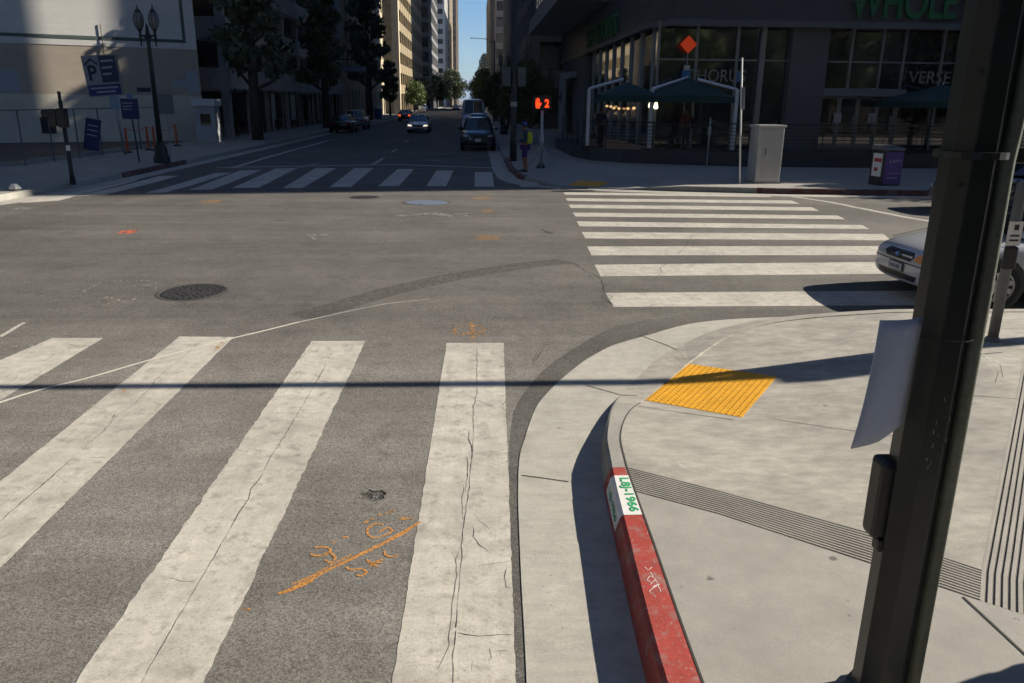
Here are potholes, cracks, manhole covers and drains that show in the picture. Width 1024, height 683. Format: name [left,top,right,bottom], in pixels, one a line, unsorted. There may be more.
manhole cover [155,283,230,301]
crack [438,368,513,674]
pothole [359,490,387,502]
crack [142,348,327,681]
